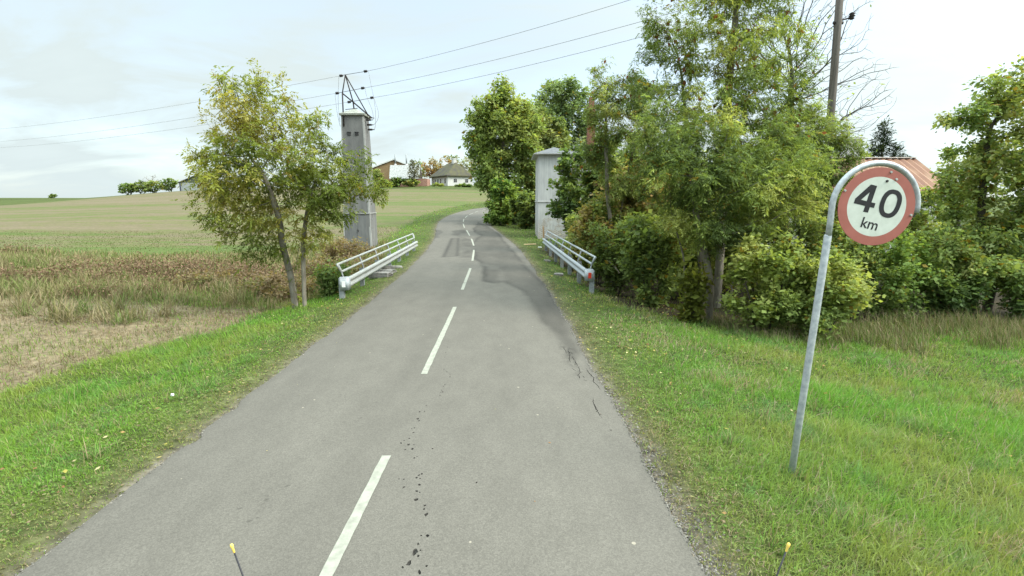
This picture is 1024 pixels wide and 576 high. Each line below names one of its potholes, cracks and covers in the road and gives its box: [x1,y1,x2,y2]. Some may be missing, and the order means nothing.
crack [564,349,600,415]
